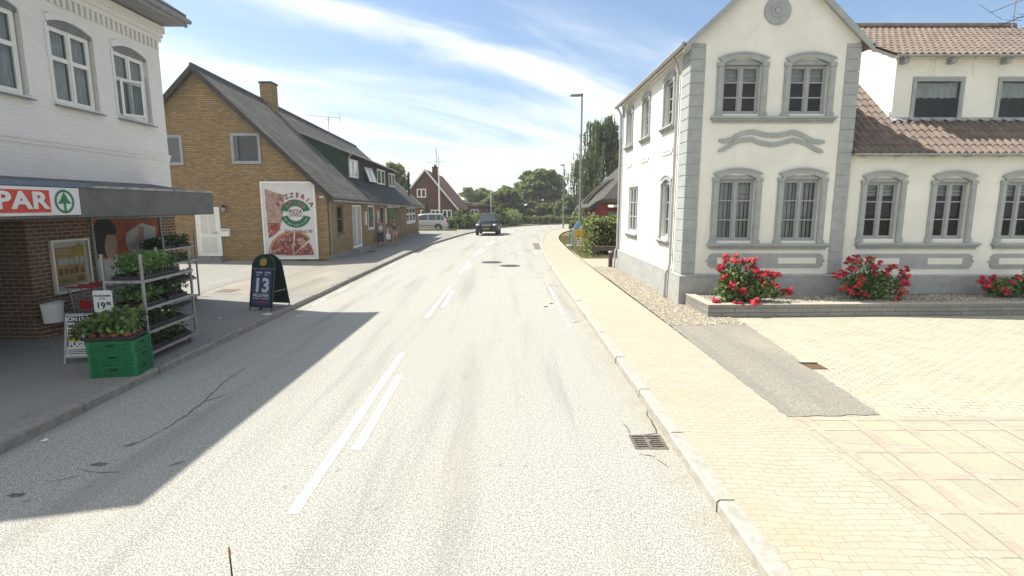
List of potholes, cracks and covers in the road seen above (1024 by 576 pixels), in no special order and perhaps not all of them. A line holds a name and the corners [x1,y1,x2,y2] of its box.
crack [124,368,245,447]
crack [625,411,657,435]
drain grate [629,435,669,450]
